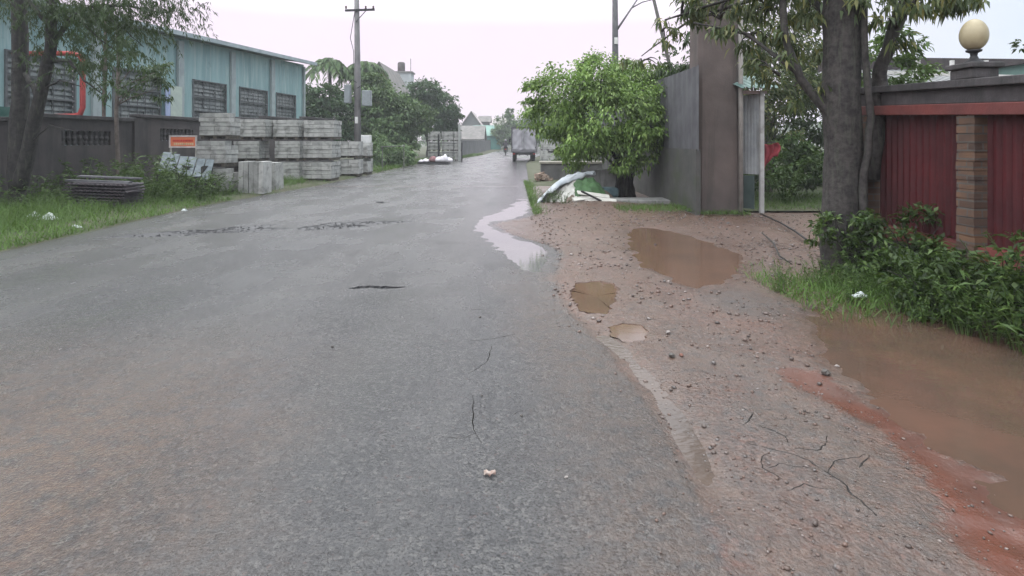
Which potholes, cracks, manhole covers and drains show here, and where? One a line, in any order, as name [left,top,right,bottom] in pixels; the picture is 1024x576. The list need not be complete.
crack [444,396,481,442]
pothole [608,323,649,342]
crack [742,405,877,516]
pothole [570,281,621,314]
